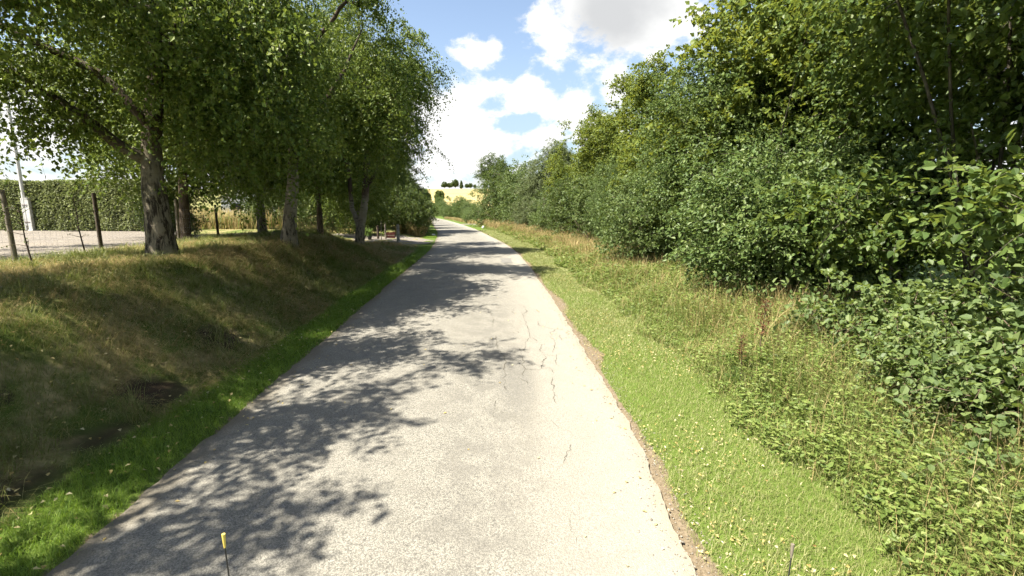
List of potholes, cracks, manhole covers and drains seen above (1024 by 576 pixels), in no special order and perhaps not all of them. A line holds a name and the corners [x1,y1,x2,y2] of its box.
crack [492,306,562,418]
